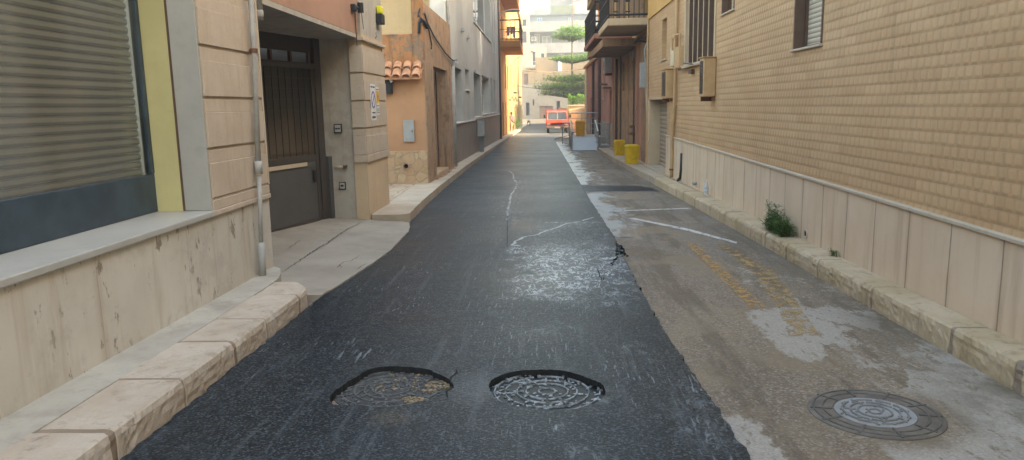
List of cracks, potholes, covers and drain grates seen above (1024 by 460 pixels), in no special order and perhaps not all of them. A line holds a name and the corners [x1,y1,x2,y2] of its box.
manhole cover [807,389,948,441]
manhole cover [490,375,605,410]
manhole cover [334,371,453,407]
